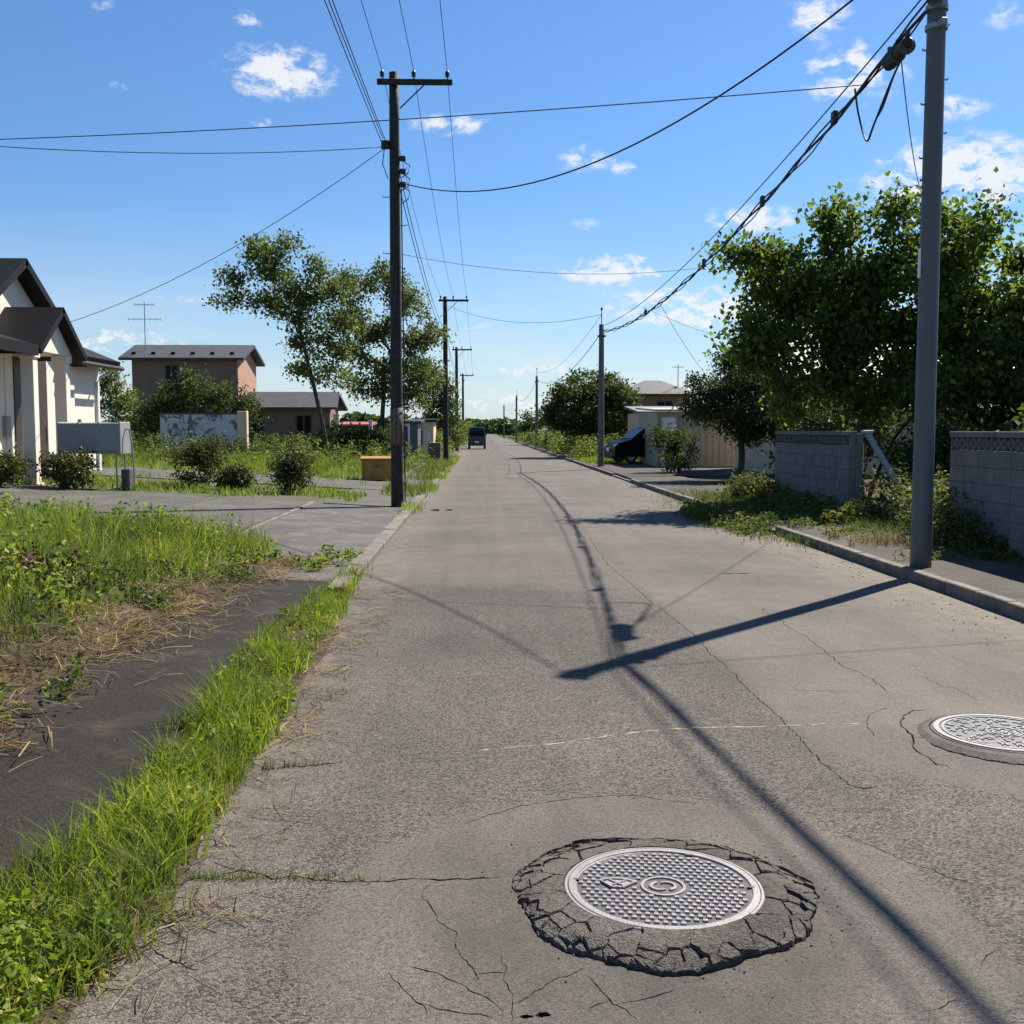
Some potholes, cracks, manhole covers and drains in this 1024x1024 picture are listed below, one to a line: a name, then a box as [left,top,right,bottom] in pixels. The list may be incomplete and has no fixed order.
crack [588,976,674,1019]
manhole cover [917,713,1024,765]
manhole cover [564,847,765,931]
crack [219,869,581,1023]
crack [466,795,694,824]
